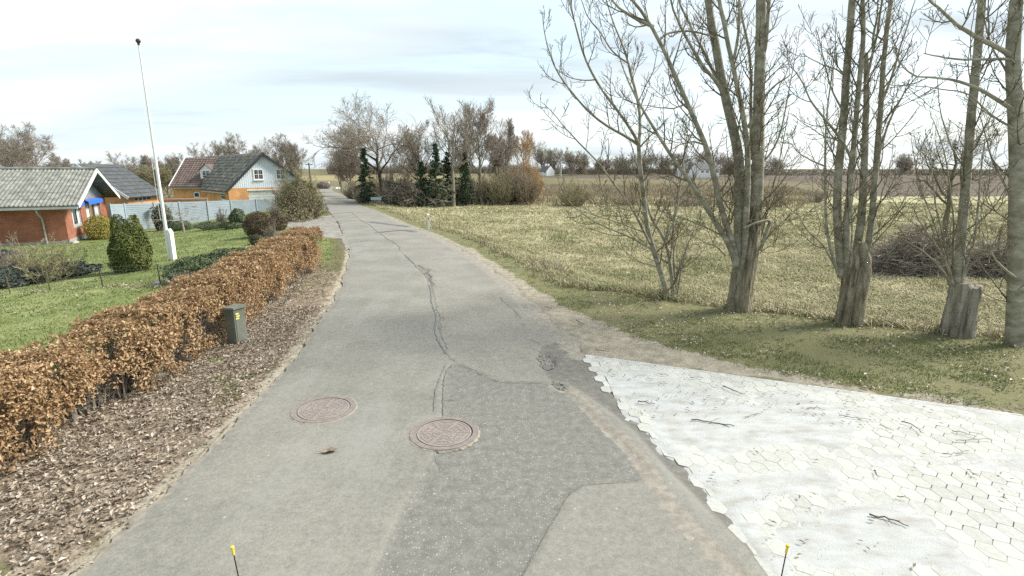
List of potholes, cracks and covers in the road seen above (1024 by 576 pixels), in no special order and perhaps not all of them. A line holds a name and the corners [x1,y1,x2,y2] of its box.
pothole [536,355,556,371]
manhole cover [407,417,481,454]
crack [399,247,542,417]
manhole cover [288,395,358,425]
